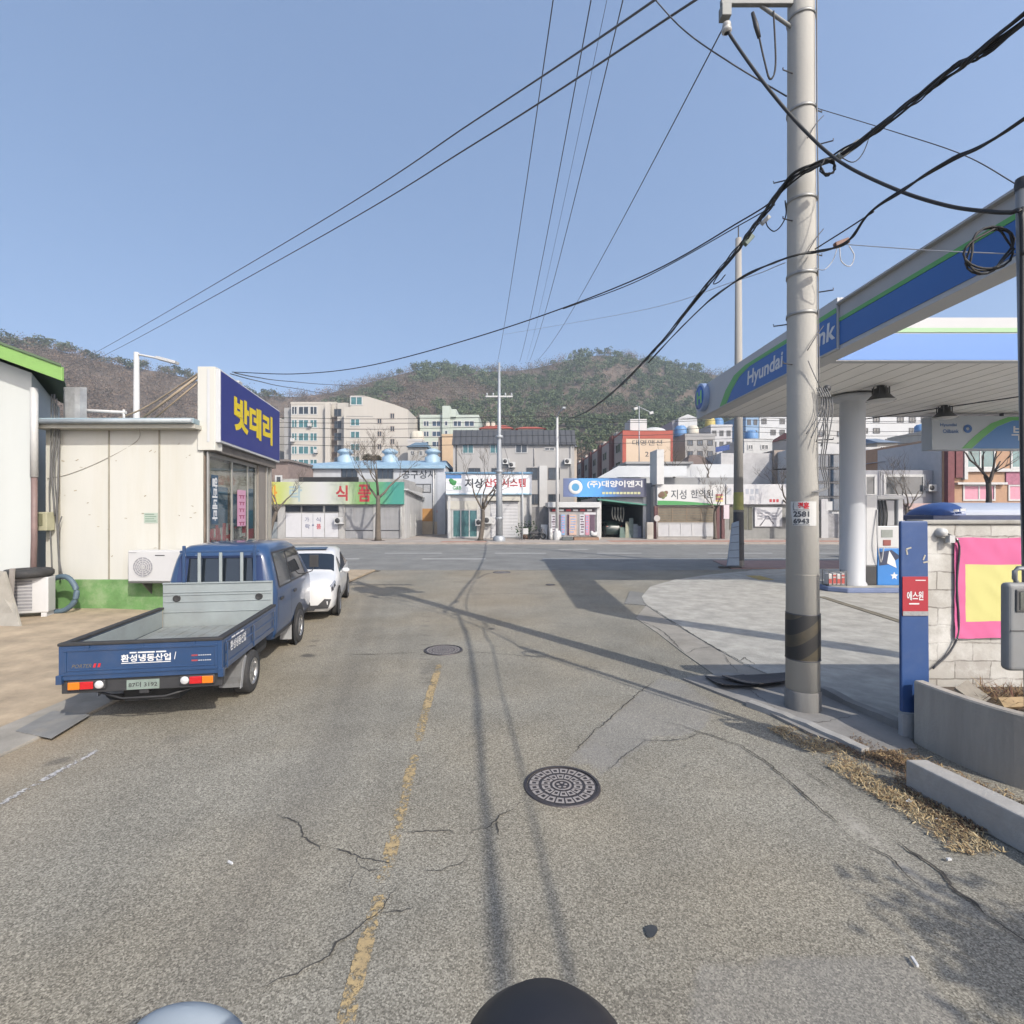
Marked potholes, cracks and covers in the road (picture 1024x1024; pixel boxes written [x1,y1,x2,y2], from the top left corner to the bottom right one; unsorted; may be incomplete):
manhole cover [424,645,463,656]
crack [866,837,1024,940]
crack [409,797,526,836]
crack [281,816,390,886]
manhole cover [524,766,601,808]
crack [562,663,669,762]
crack [608,721,864,845]
